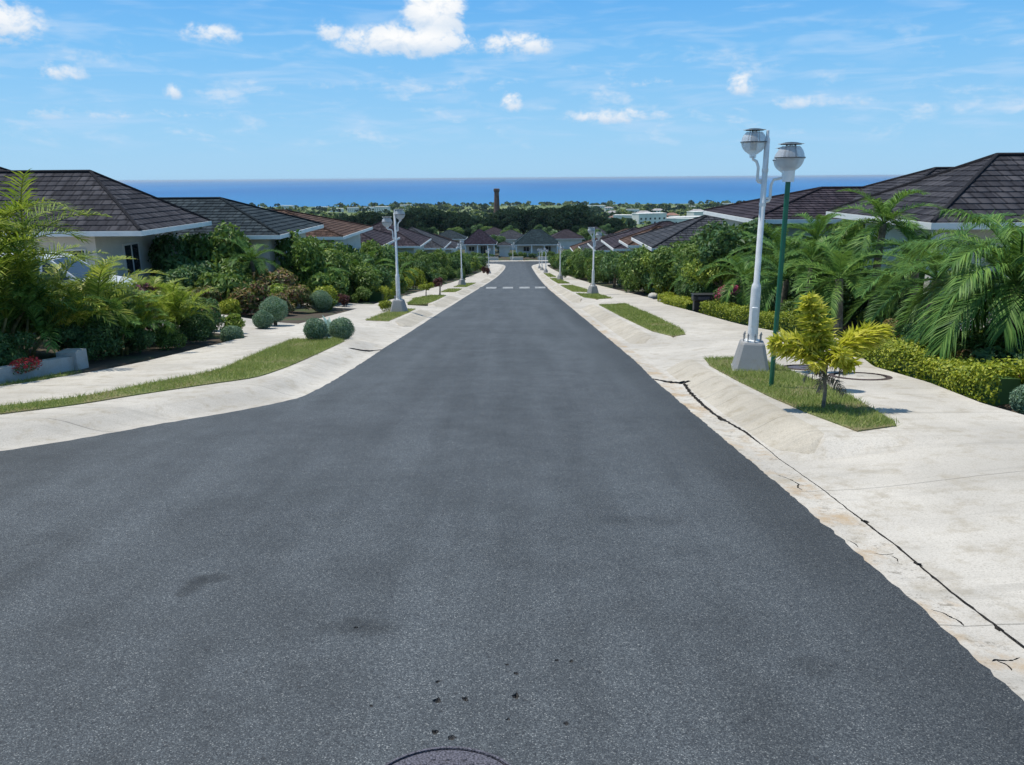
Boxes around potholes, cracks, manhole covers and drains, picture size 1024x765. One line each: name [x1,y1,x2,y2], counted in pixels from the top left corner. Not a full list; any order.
manhole cover [384,746,511,765]
crack [652,378,1024,671]
manhole cover [828,372,893,381]
